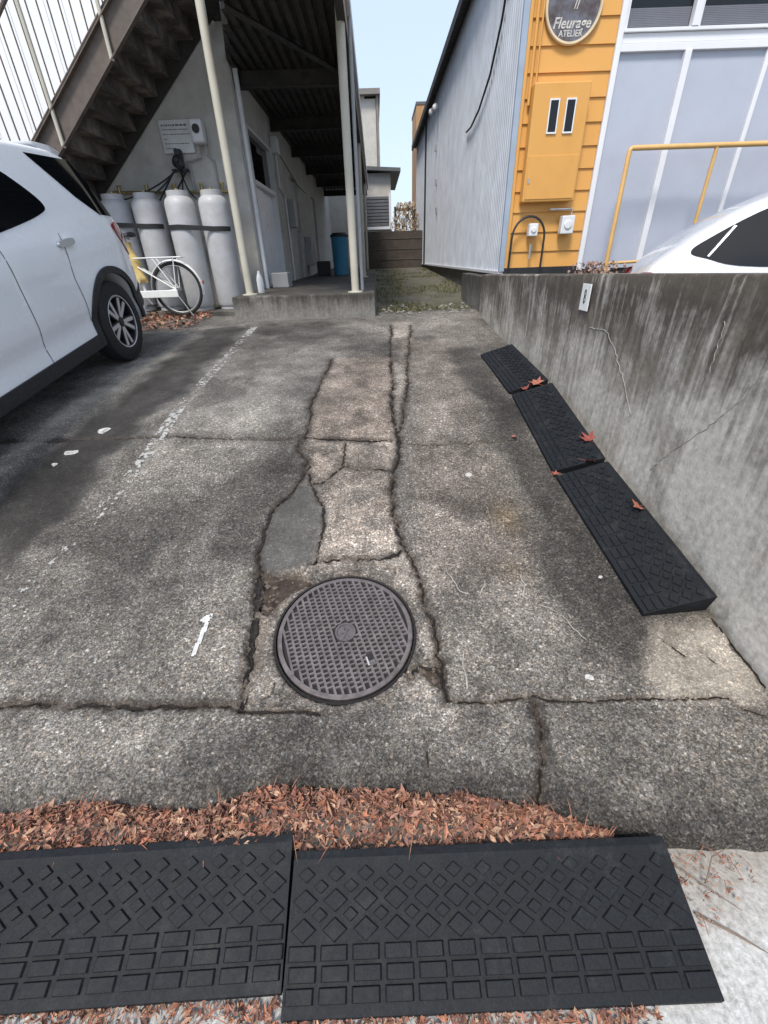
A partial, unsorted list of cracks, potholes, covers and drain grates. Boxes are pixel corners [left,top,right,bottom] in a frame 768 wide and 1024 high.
crack [0,326,766,806]
manhole cover [273,576,417,706]
